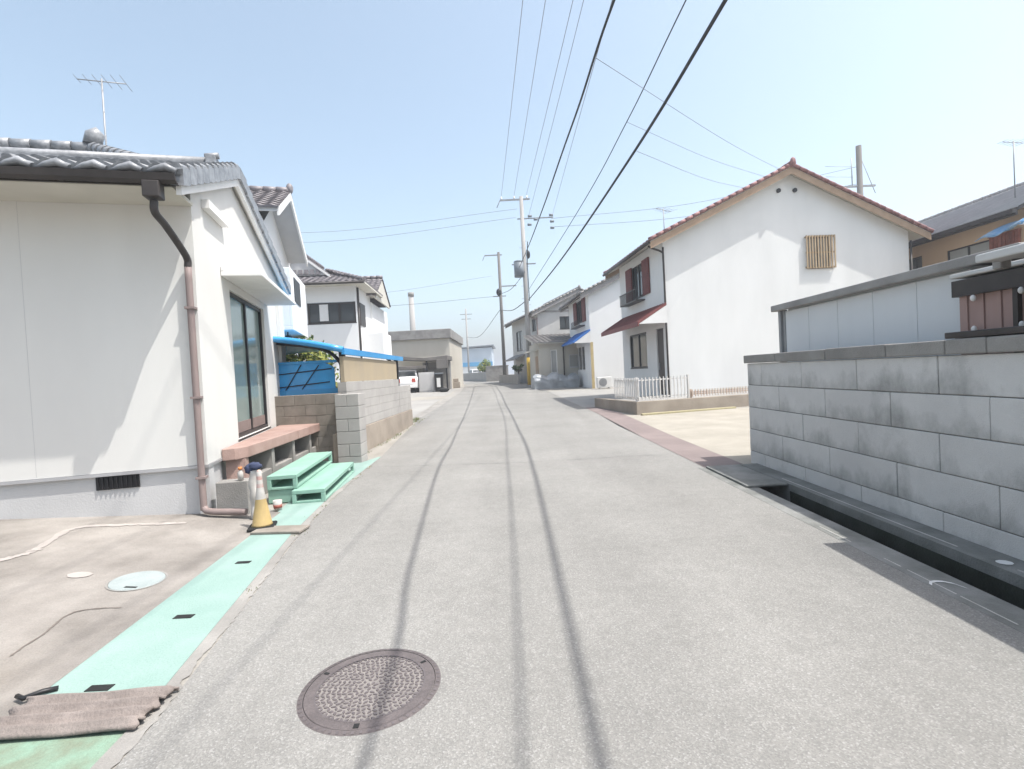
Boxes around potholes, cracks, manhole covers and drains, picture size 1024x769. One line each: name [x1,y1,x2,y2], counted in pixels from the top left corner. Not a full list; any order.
crack [0,522,187,561]
manhole cover [296,648,441,736]
crack [10,607,122,656]
utility cover [105,570,168,591]
